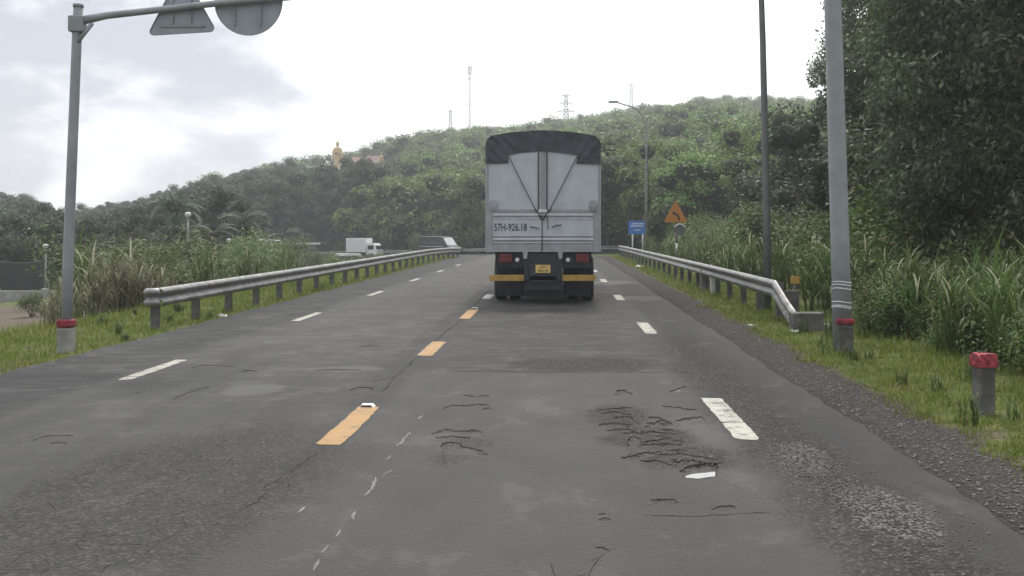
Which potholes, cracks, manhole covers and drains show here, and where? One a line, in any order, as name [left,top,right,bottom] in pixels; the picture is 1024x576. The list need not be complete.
crack [372,291,488,393]
pothole [441,442,488,465]
crack [549,555,603,576]
